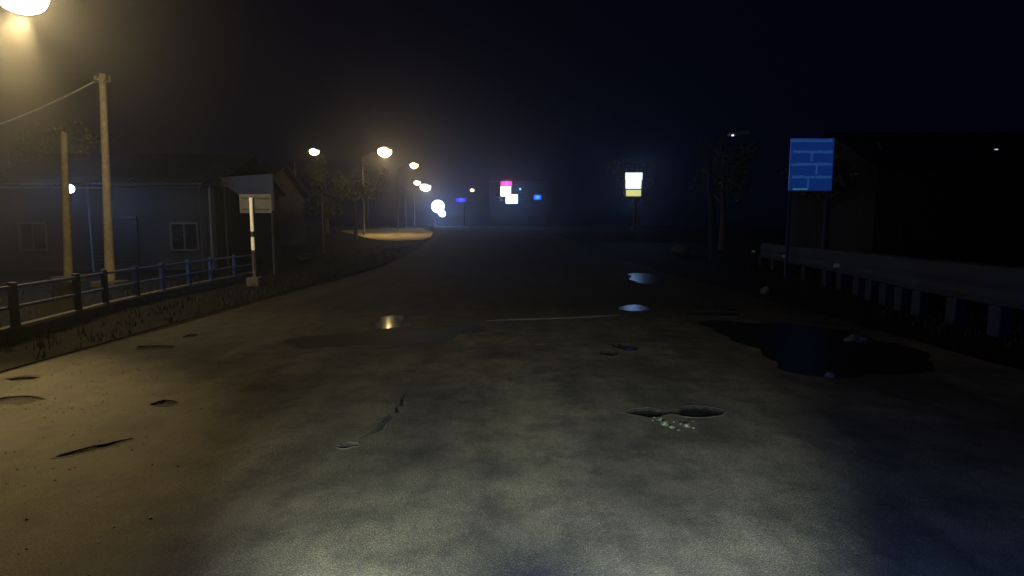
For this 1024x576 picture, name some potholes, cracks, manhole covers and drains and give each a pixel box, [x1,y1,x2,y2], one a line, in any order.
pothole [51,437,135,459]
crack [359,391,408,439]
pothole [609,343,643,352]
pothole [622,405,728,431]
pothole [0,395,47,405]
pothole [148,399,180,407]
